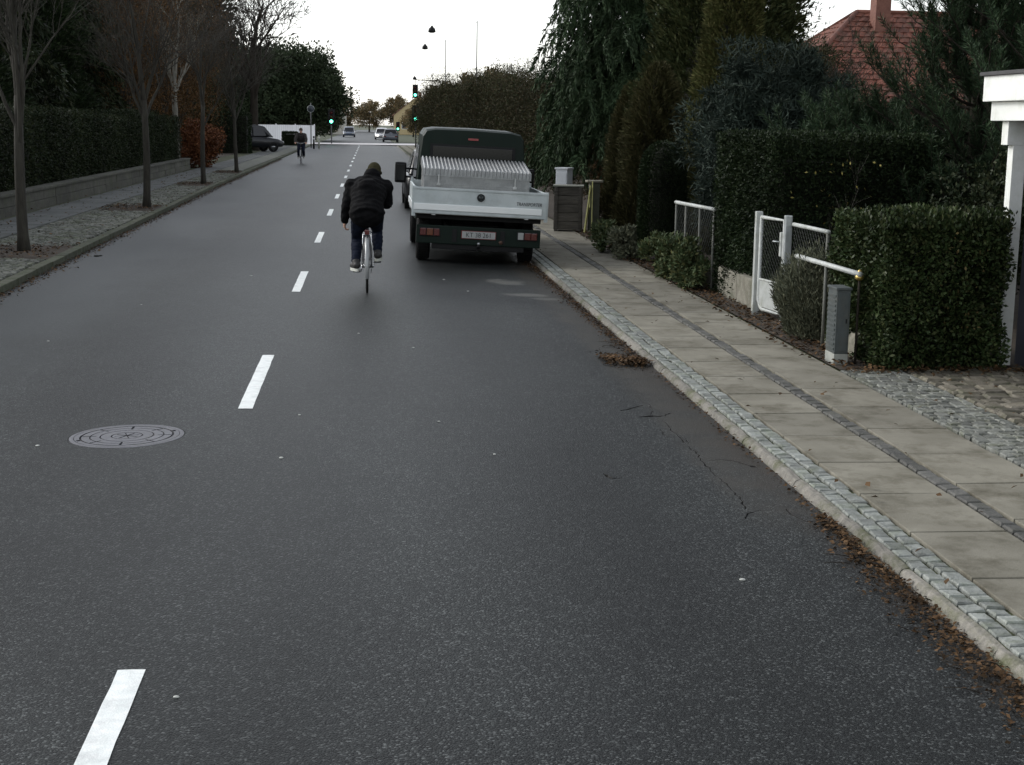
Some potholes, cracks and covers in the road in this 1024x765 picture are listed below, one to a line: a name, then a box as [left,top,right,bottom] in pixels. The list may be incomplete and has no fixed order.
crack [620,397,763,519]
manhole cover [69,424,185,448]
